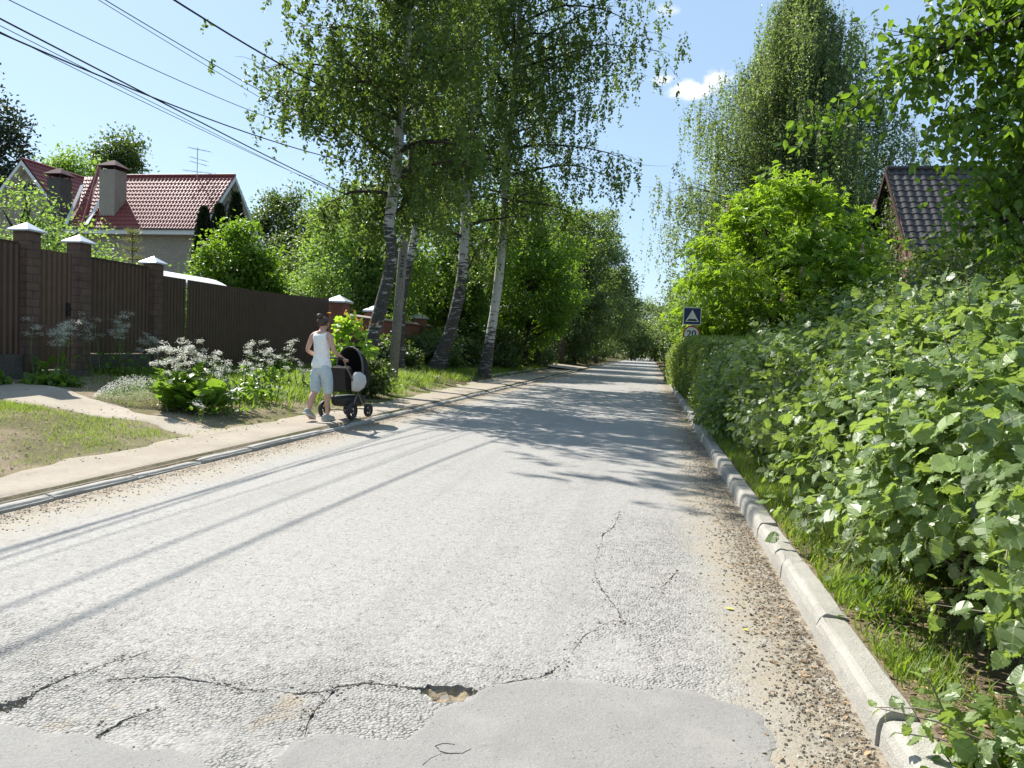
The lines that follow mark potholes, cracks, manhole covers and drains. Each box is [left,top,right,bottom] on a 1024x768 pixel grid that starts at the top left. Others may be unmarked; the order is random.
pothole [413,684,478,703]
crack [0,652,420,734]
crack [480,512,626,690]
crack [96,708,158,739]
crack [423,743,471,765]
